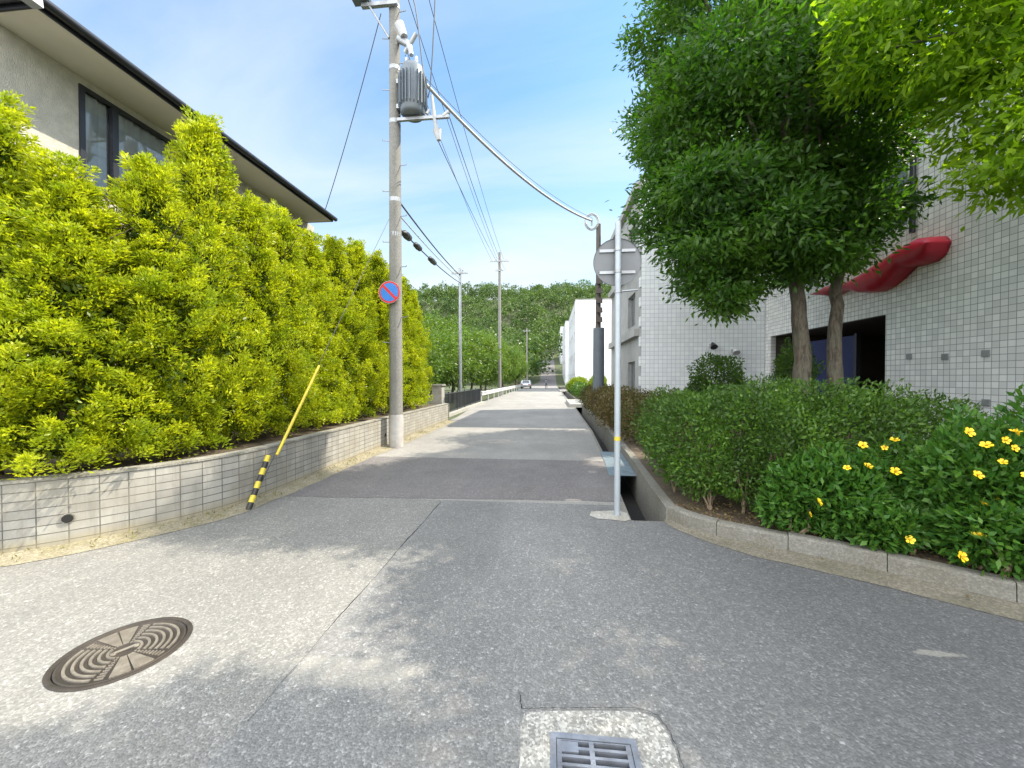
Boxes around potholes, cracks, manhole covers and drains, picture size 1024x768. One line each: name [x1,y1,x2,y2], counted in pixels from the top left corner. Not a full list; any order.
manhole cover [42,617,193,692]
drain grate [519,711,680,768]
